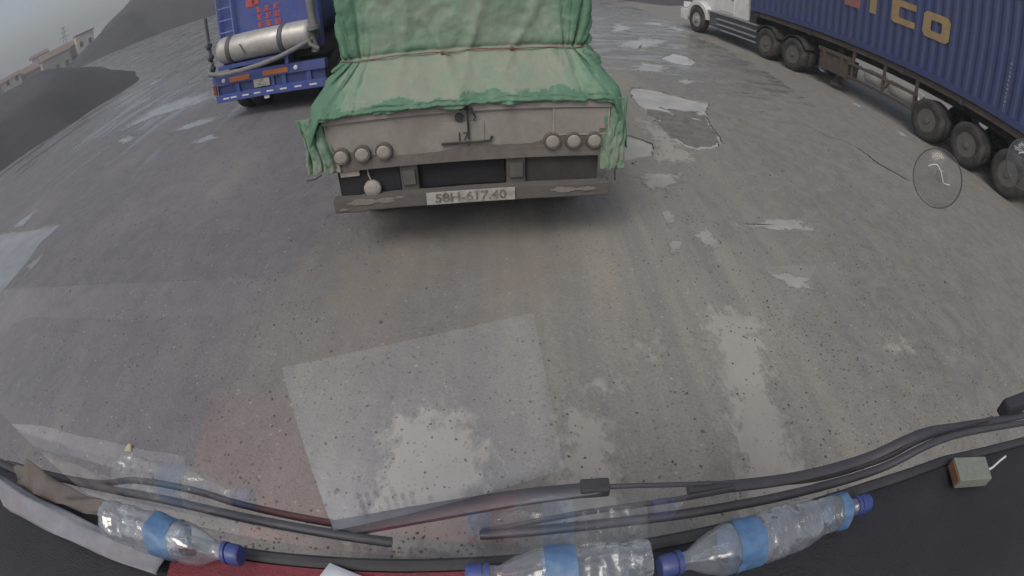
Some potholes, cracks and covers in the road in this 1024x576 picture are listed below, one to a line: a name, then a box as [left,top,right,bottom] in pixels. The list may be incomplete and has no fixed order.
pothole [624,135,654,160]
crack [810,127,909,181]
pothole [629,87,723,150]
pothole [661,53,697,66]
